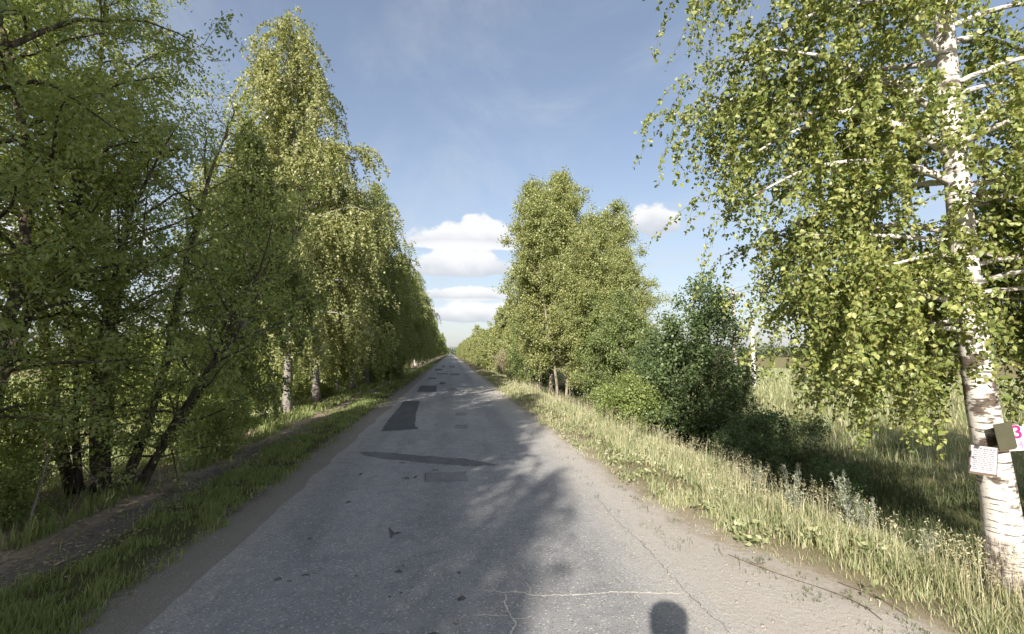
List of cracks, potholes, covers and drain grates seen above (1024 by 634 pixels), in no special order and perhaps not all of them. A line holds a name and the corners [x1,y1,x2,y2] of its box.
crack [474,498,731,634]
